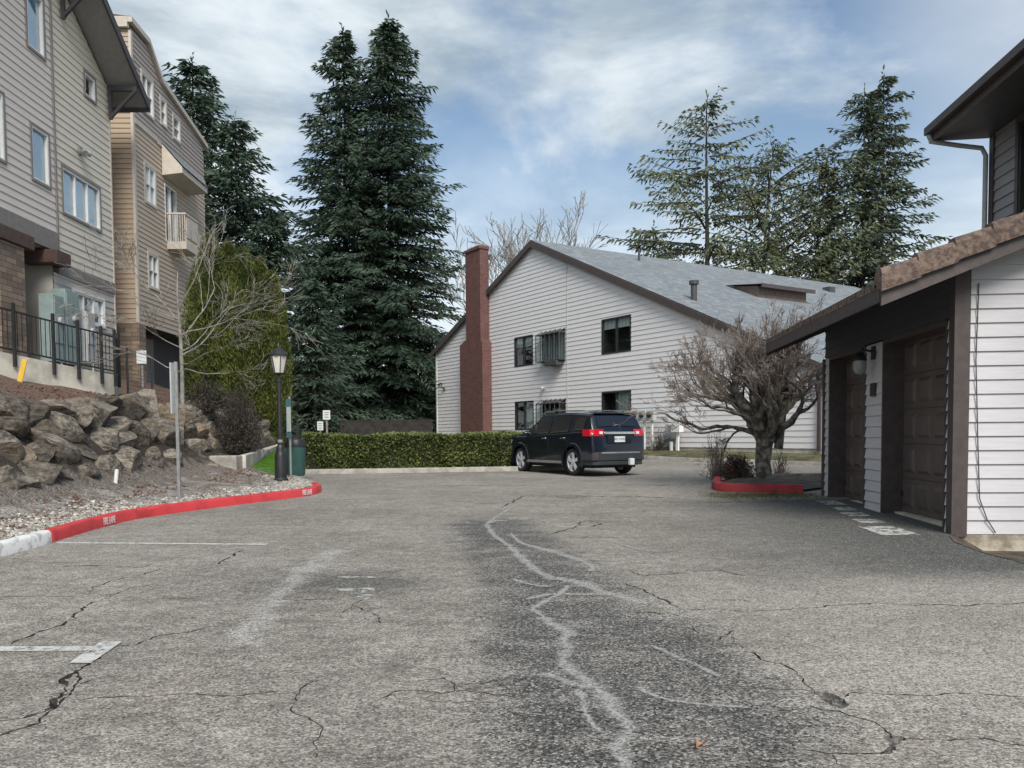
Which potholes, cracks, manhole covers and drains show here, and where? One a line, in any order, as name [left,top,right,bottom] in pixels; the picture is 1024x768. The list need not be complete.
pothole [812,692,849,708]
crack [382,678,513,703]
crack [0,626,324,757]
crack [5,565,196,644]
crack [485,505,1024,768]
